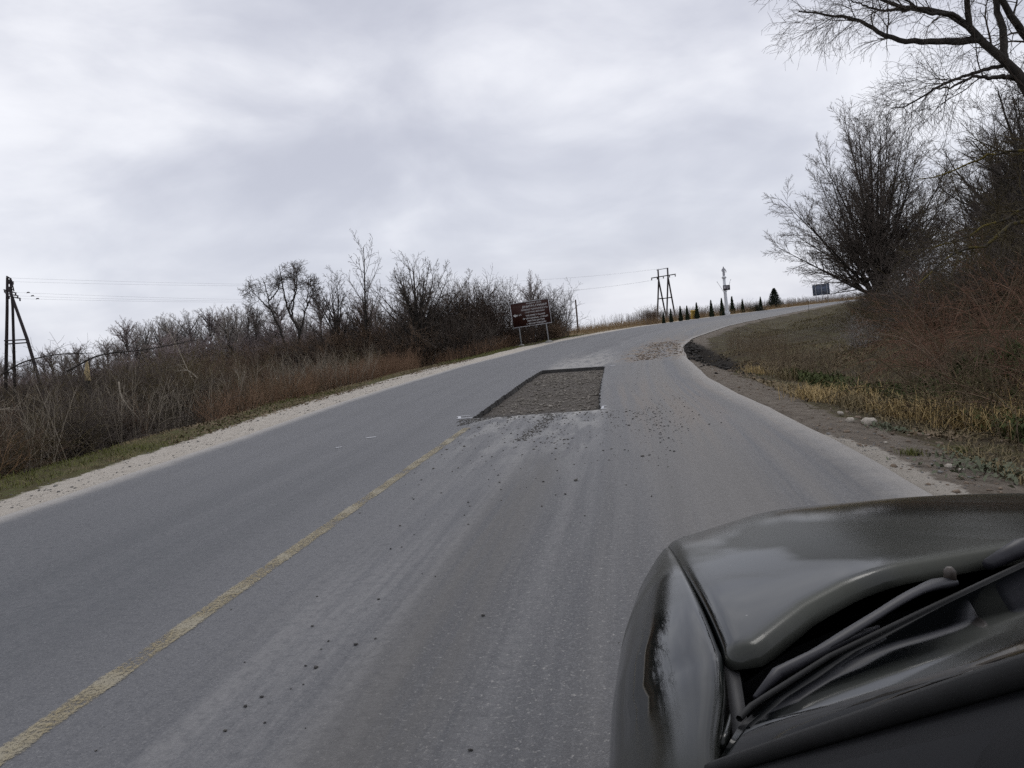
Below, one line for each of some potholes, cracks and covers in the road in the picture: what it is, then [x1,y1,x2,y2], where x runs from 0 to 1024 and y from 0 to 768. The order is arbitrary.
pothole [473,366,605,418]
